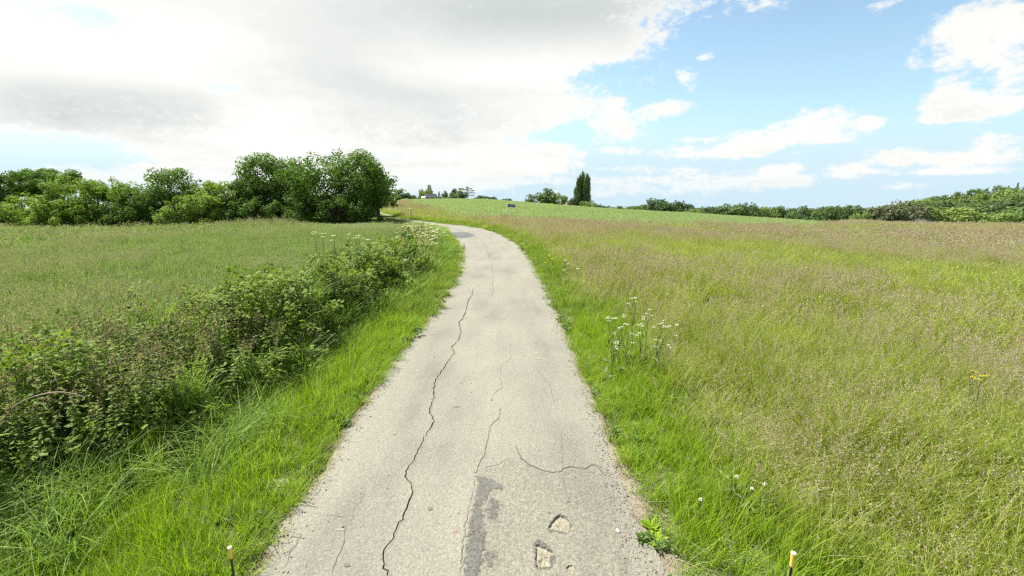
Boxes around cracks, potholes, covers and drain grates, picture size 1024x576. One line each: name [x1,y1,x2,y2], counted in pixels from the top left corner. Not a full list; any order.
crack [378,290,615,576]
pothole [535,545,554,567]
pothole [548,516,570,532]
crack [329,493,365,571]
